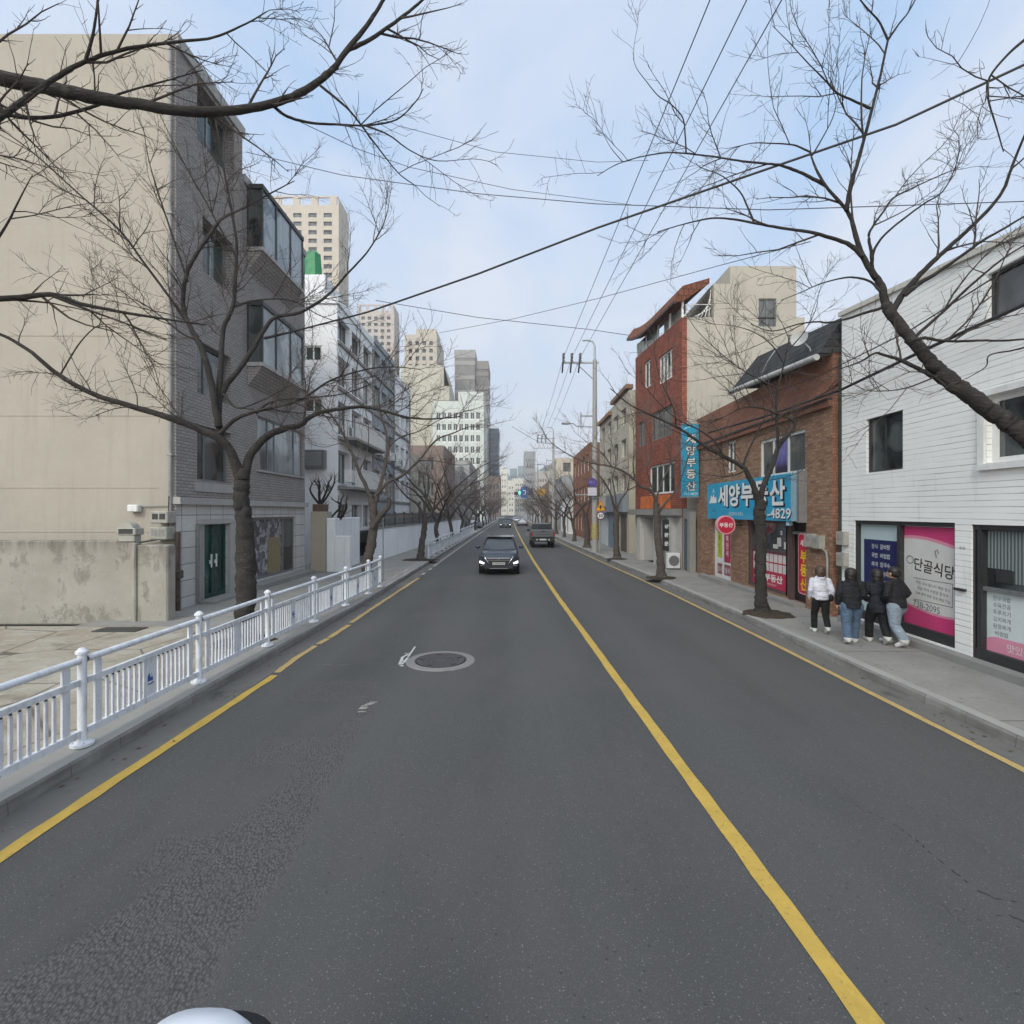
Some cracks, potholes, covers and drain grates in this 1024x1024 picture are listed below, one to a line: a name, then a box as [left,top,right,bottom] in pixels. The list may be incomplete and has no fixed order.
manhole cover [406,651,475,672]
crack [841,798,1024,922]
